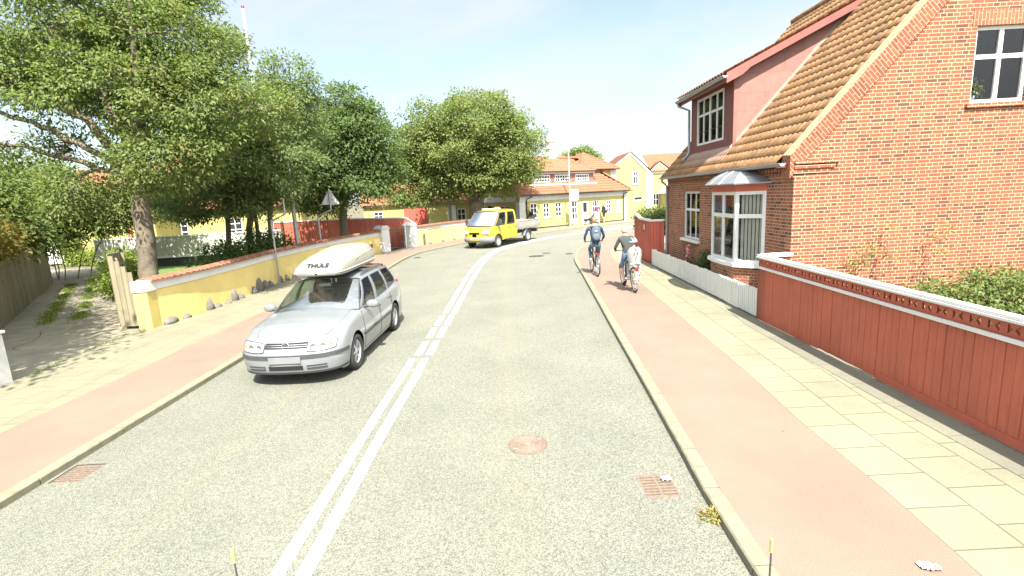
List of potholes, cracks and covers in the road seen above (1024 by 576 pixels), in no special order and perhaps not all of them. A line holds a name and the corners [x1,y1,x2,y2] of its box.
drain grate [636,474,681,498]
drain grate [49,463,106,483]
manhole cover [508,435,548,455]
